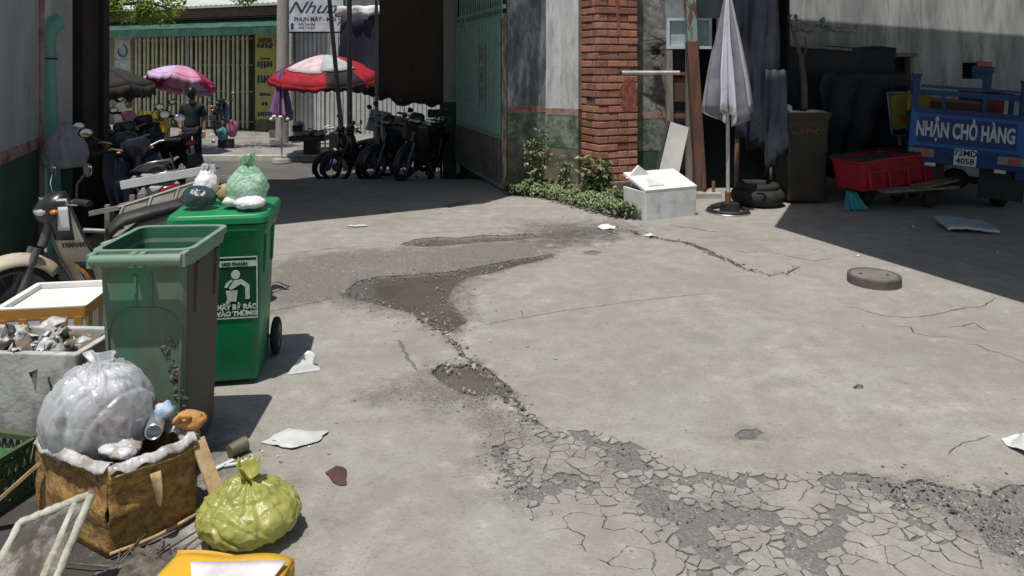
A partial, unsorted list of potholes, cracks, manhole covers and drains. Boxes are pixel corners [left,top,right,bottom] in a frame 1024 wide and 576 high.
crack [397,319,473,371]
crack [491,398,990,576]
manhole cover [847,267,902,291]
crack [476,292,722,327]
crack [838,299,1024,363]
crack [617,225,832,275]
pothole [734,429,764,440]
pothole [342,254,553,333]
pothole [431,364,514,400]
